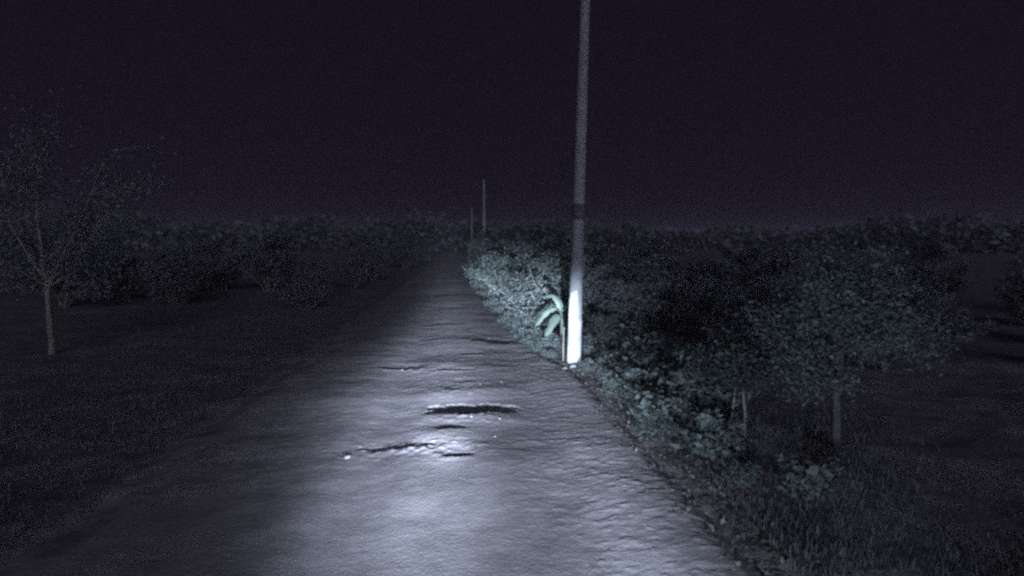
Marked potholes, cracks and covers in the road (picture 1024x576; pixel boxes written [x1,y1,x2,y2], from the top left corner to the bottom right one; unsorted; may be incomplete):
pothole [354,440,437,453]
pothole [422,402,523,415]
